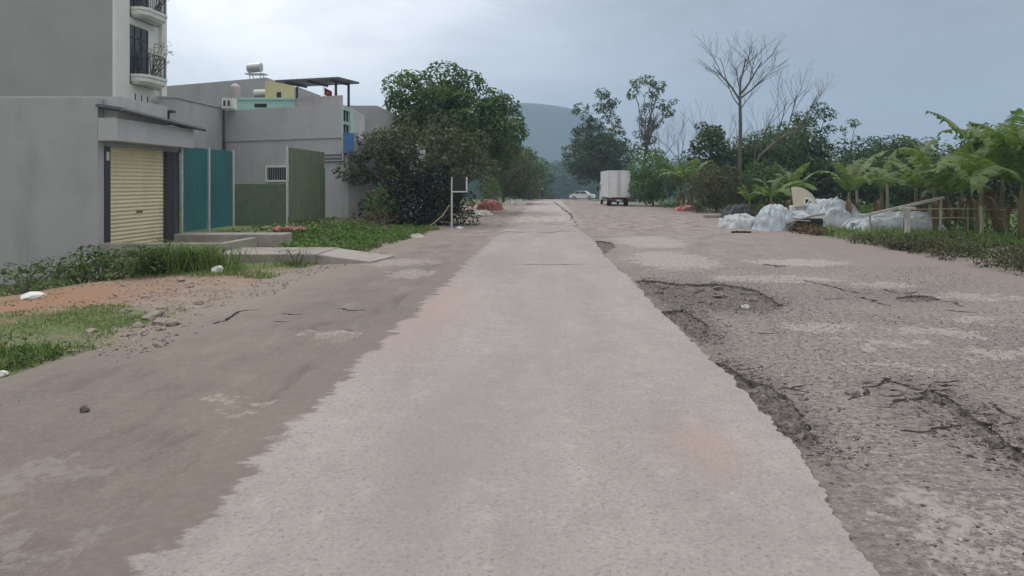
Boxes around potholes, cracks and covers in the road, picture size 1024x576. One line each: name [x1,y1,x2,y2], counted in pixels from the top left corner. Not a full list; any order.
pothole [595,241,615,254]
pothole [661,309,710,339]
crack [213,309,299,324]
crack [804,280,964,312]
crack [848,377,964,435]
pothole [635,280,783,311]
pothole [715,362,822,450]
pothole [896,295,941,303]
crack [988,402,1024,425]
